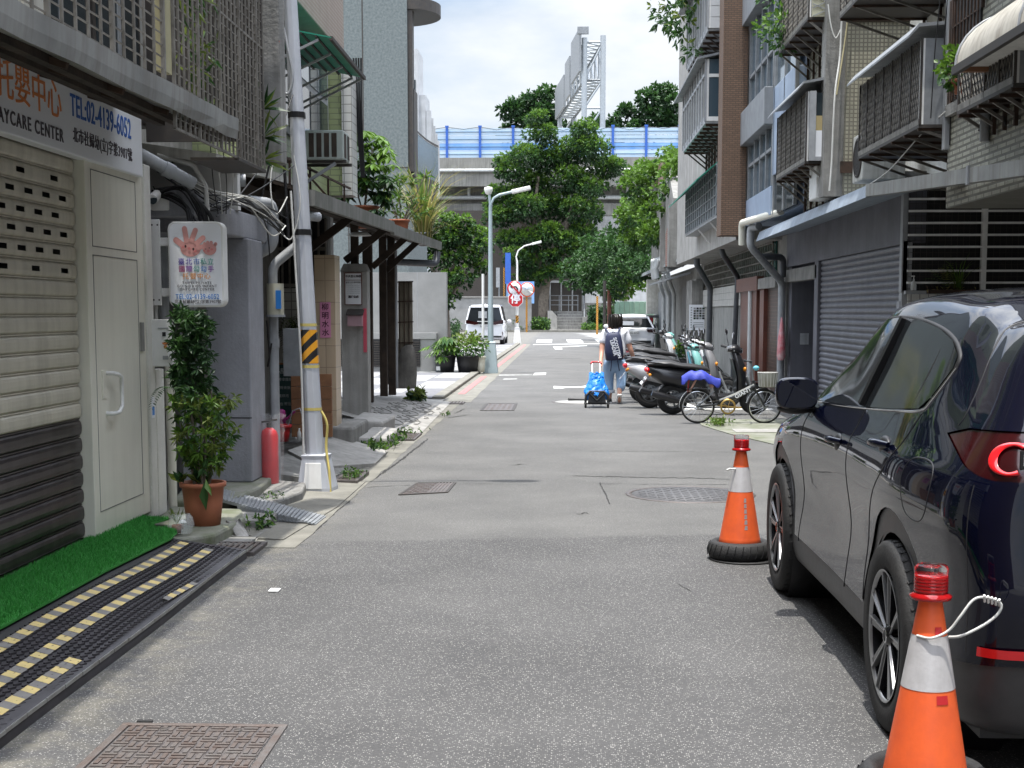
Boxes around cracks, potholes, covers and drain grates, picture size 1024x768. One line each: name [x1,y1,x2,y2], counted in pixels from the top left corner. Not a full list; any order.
manhole cover [75,719,288,768]
manhole cover [398,482,456,496]
manhole cover [625,486,756,503]
manhole cover [480,403,518,411]
